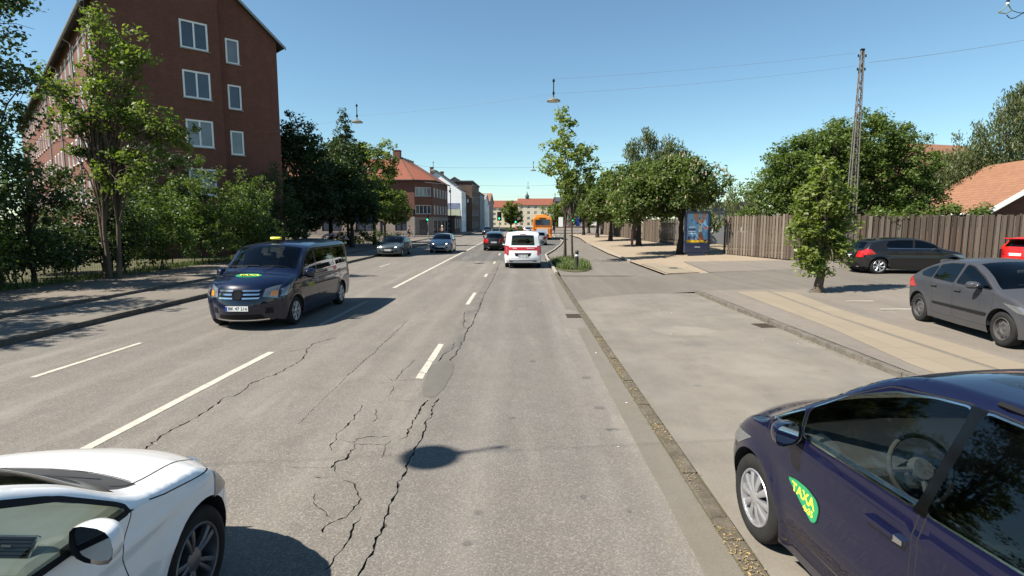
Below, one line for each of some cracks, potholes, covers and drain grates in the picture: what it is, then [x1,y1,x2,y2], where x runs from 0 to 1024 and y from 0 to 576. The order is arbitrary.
crack [439,263,500,361]
crack [298,322,406,424]
crack [292,362,439,576]
crack [145,337,336,449]
